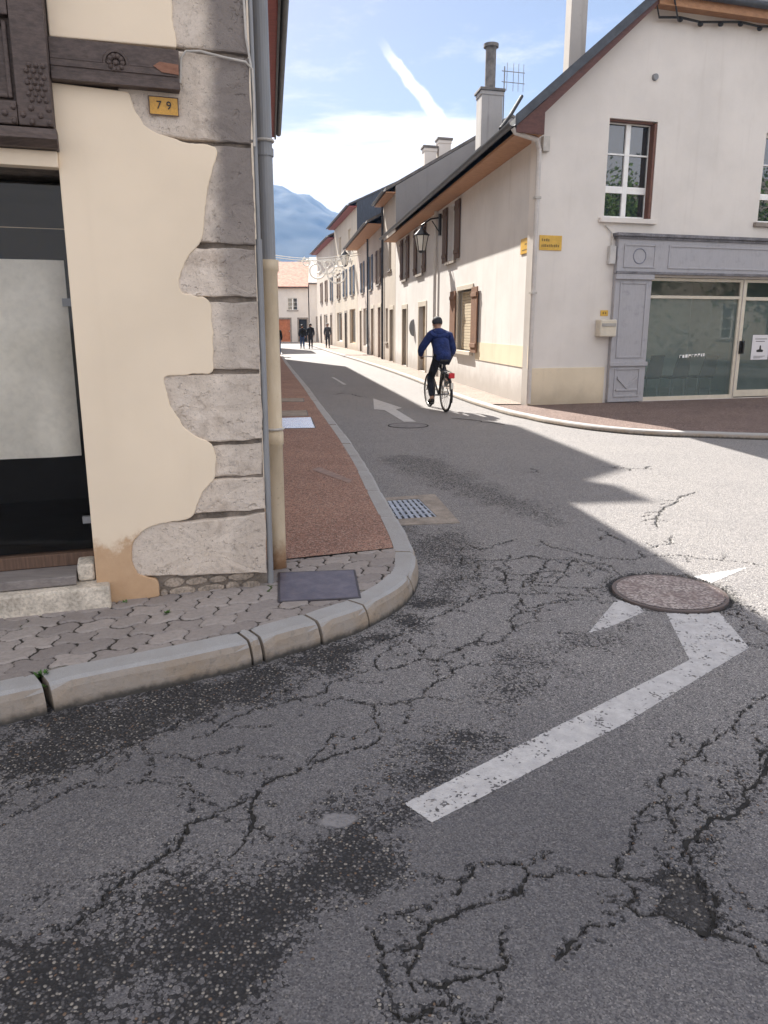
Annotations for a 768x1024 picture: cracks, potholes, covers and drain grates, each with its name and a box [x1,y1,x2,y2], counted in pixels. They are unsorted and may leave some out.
crack [366,858,555,1023]
crack [14,540,639,932]
crack [576,698,768,964]
drain grate [385,494,460,526]
crack [555,925,613,961]
crack [644,493,725,560]
utility cover [282,417,316,429]
manhole cover [612,574,729,614]
pothole [660,866,718,938]
utility cover [277,570,361,604]
